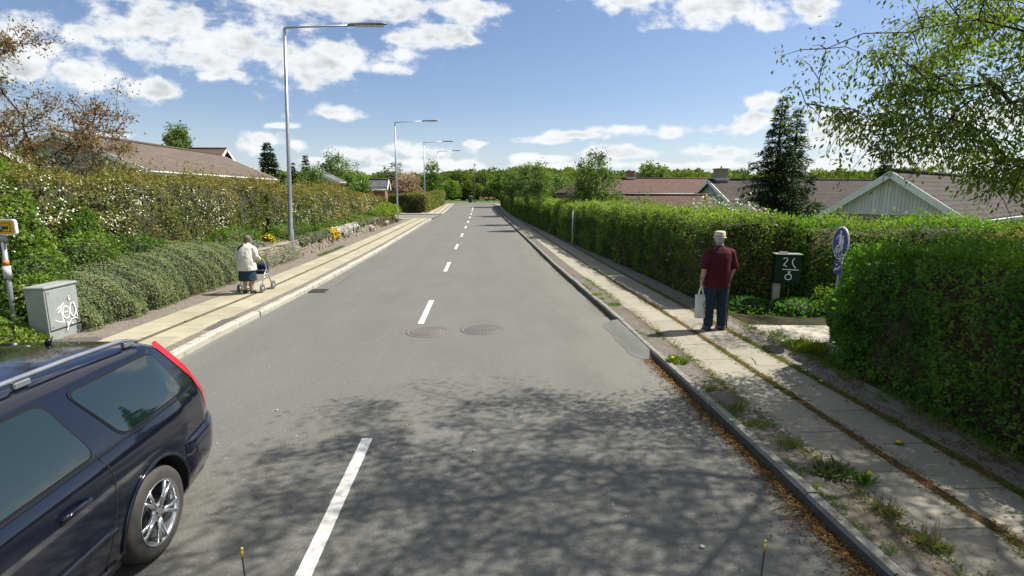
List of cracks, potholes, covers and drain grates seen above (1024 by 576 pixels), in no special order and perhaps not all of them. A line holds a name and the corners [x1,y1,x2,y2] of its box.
manhole cover [405,326,450,338]
manhole cover [460,324,504,335]
